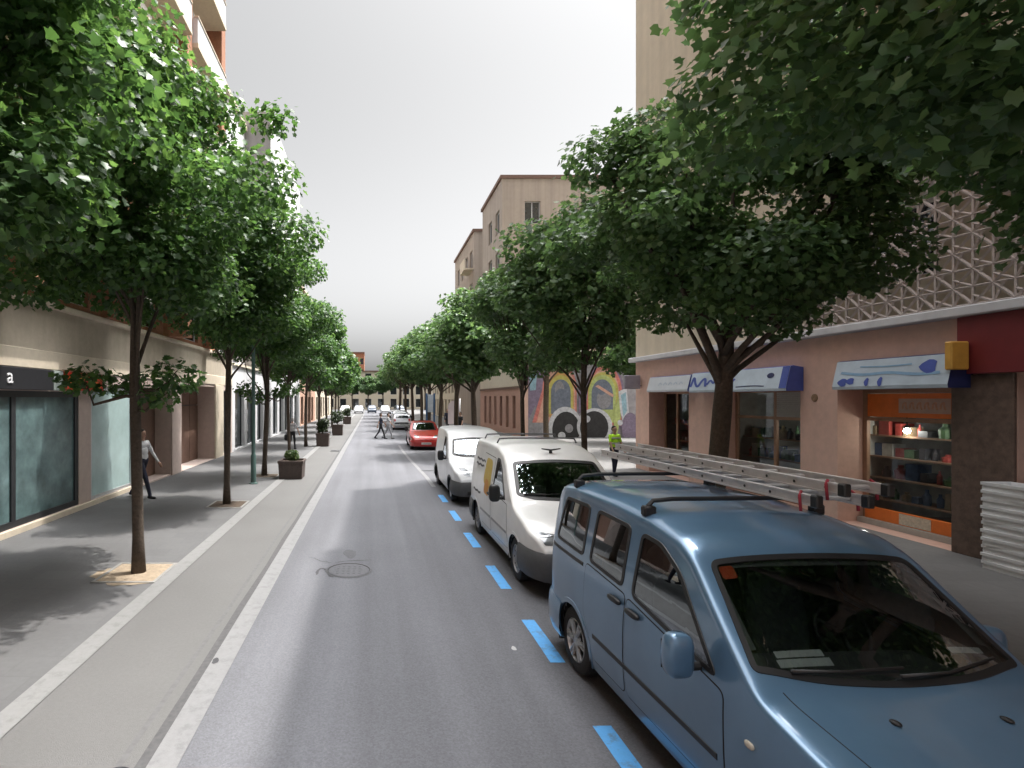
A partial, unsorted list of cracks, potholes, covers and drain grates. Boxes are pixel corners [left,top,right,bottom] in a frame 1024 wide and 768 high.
manhole cover [325,563,372,578]
